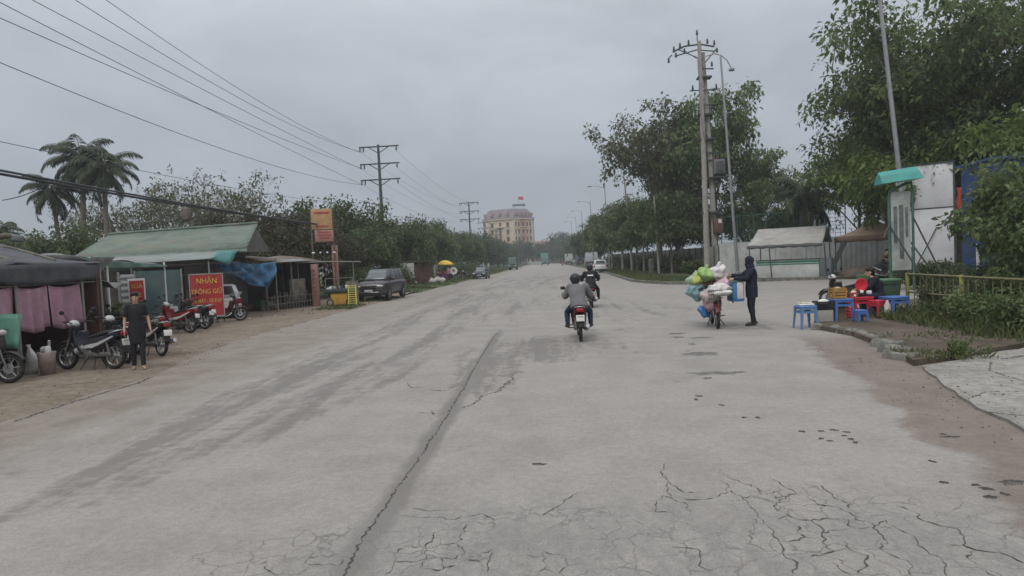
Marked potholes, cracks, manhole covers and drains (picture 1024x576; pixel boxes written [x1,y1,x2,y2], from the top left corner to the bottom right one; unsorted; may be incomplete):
crack [263,329,517,576]
crack [655,467,1024,576]
